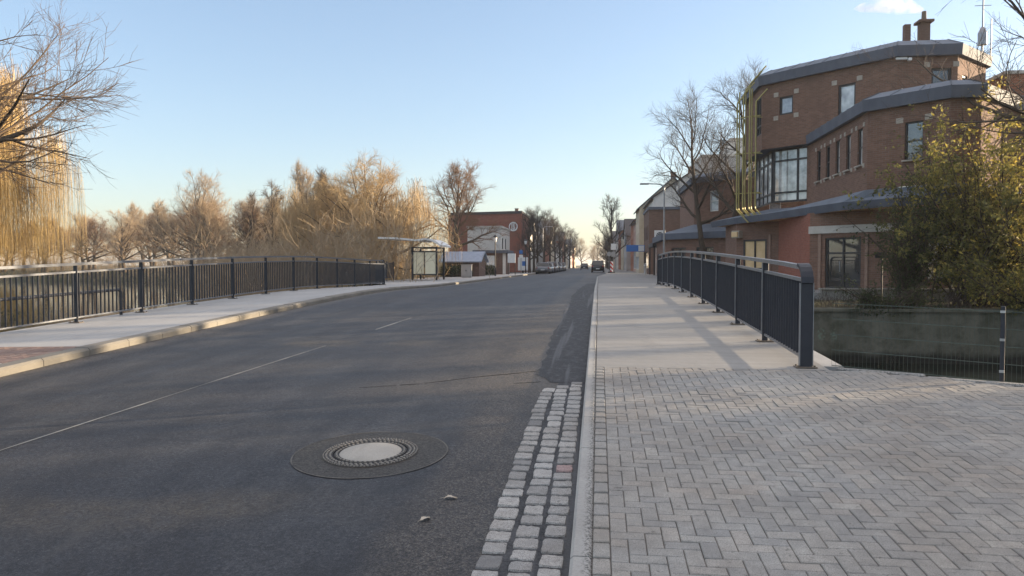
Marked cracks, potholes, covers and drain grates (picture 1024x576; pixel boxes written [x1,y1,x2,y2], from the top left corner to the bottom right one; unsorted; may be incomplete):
manhole cover [321,438,419,468]
